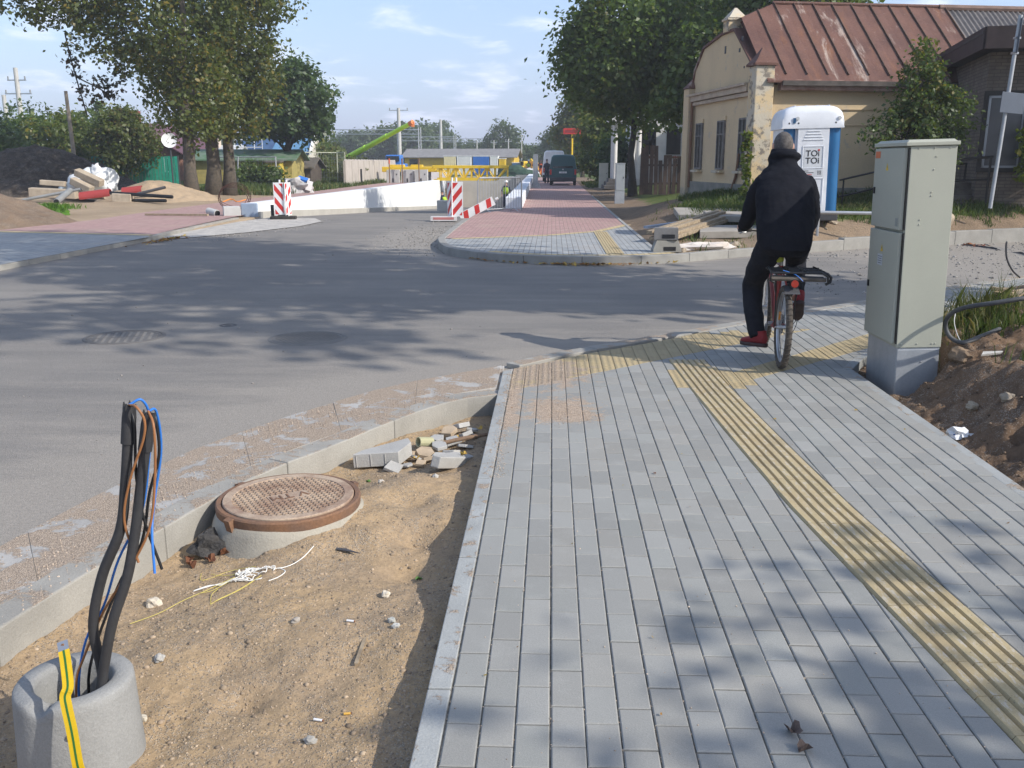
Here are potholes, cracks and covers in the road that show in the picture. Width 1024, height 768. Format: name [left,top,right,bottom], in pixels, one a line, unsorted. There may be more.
manhole cover [268,331,347,346]
manhole cover [212,473,364,559]
